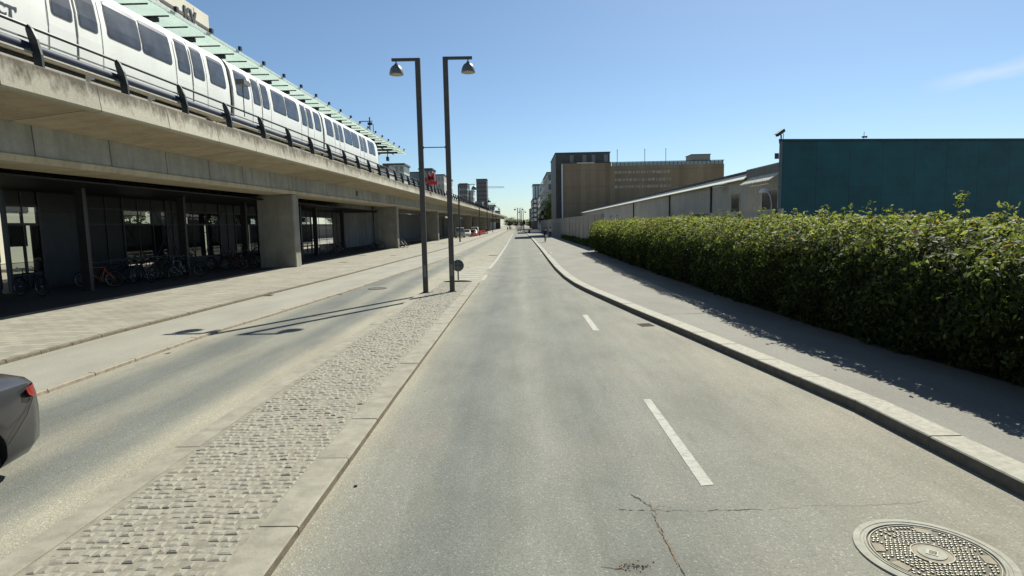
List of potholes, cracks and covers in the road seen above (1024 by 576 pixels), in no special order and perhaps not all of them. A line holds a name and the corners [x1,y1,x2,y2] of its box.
crack [599,494,924,576]
manhole cover [852,519,1023,576]
